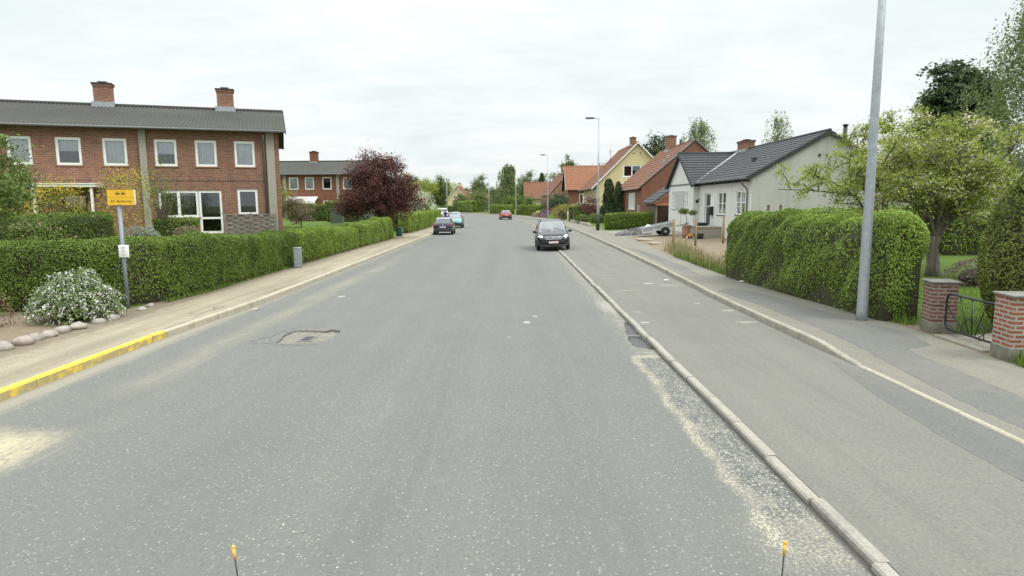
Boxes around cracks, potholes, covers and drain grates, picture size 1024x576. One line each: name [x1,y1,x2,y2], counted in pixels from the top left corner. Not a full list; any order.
pothole [276,330,340,344]
pothole [628,336,655,350]
pothole [624,322,639,335]
